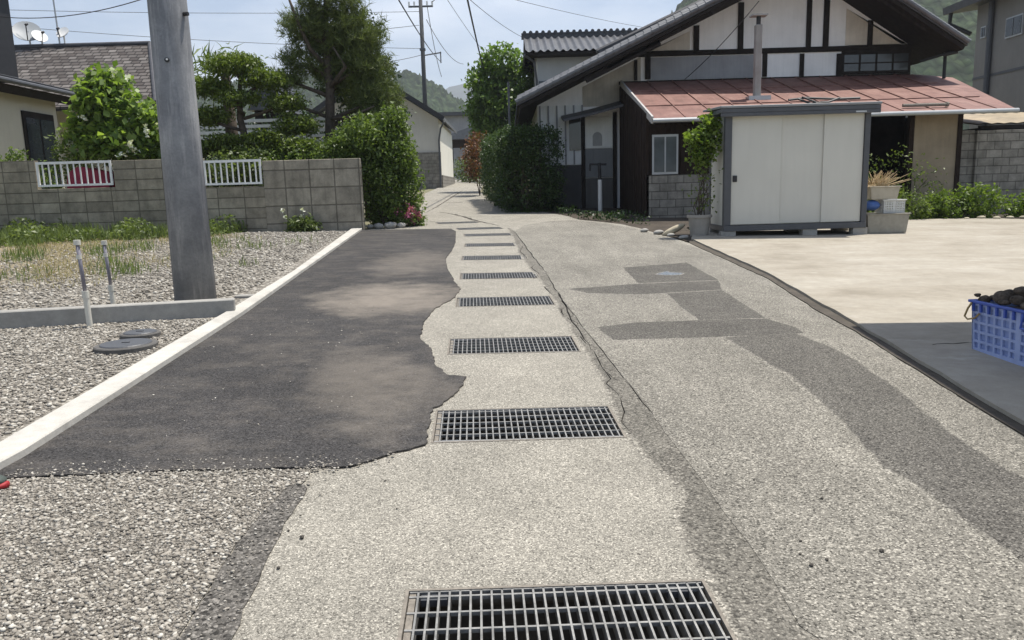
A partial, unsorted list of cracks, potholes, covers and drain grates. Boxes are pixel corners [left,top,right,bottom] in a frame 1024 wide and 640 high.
drain grate [455,296,556,307]
drain grate [431,405,627,443]
drain grate [447,336,581,355]
manhole cover [119,329,161,339]
manhole cover [93,338,158,355]
crack [517,235,652,428]
drain grate [397,579,737,640]
